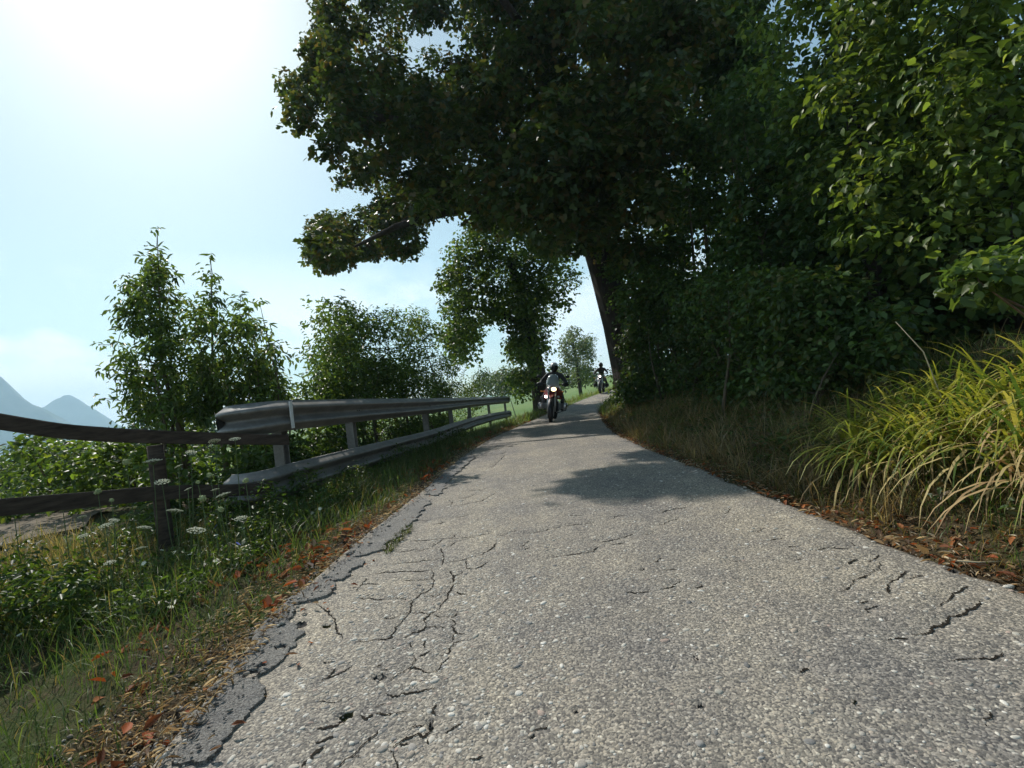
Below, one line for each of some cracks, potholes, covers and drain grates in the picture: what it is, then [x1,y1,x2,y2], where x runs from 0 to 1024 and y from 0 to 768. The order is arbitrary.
crack [950,652,1003,661]
crack [819,541,923,612]
crack [629,558,703,594]
crack [888,586,981,641]
crack [301,490,633,768]
